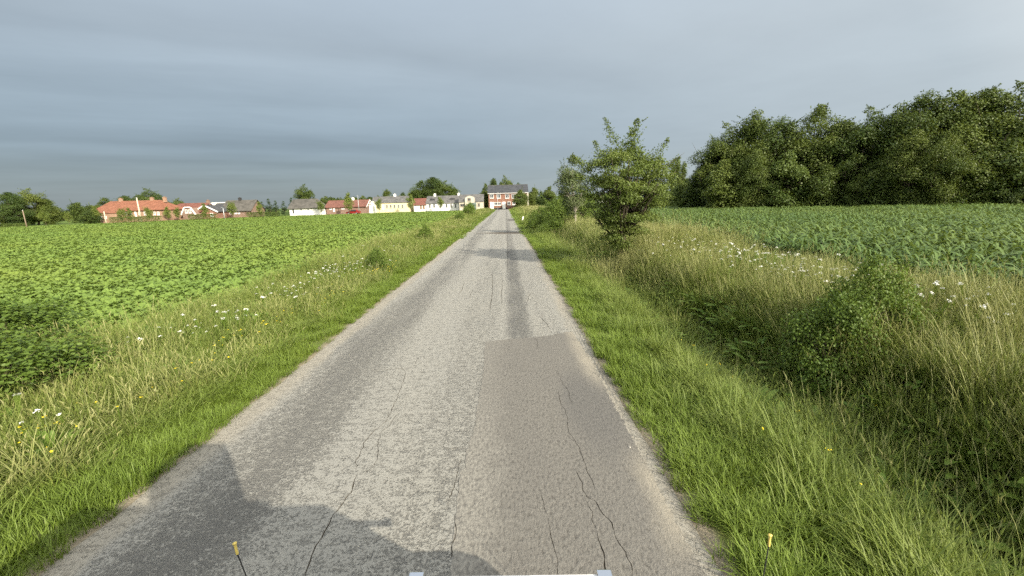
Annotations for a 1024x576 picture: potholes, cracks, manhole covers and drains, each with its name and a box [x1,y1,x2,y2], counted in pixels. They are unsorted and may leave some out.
crack [305,358,419,576]
crack [445,447,462,557]
crack [558,375,633,572]
